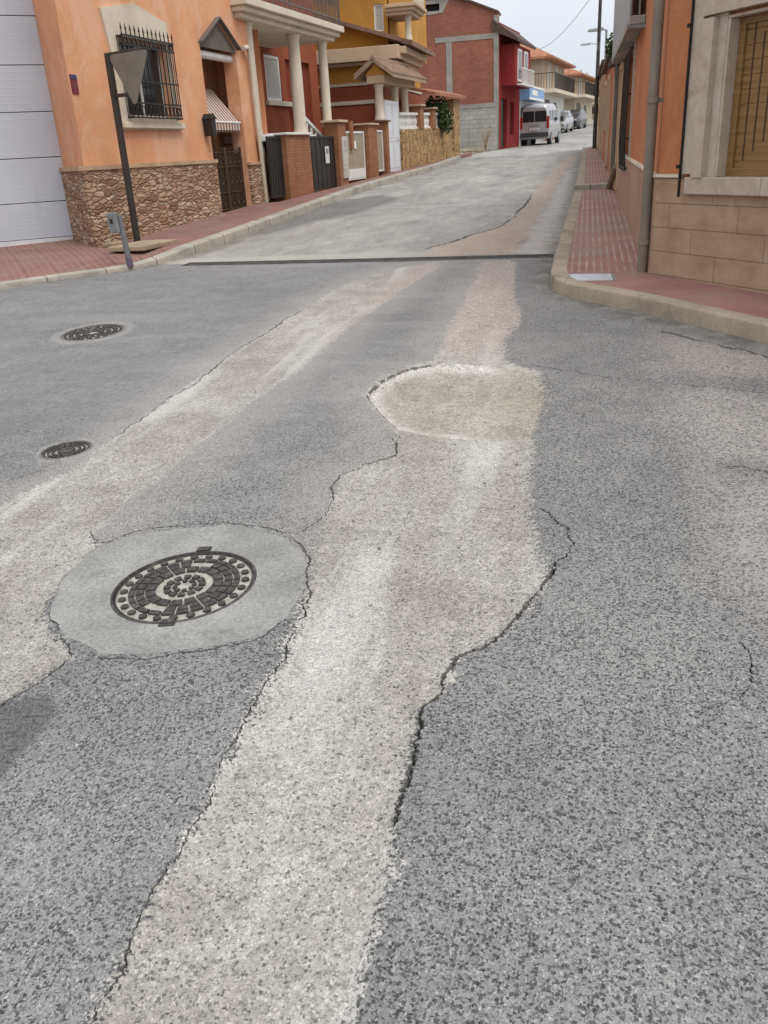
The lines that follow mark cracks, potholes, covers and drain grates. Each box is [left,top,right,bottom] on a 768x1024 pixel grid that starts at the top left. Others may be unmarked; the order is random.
manhole cover [110,546,257,627]
manhole cover [39,440,93,460]
crack [423,194,532,250]
crack [660,331,768,358]
crack [0,438,398,1024]
crack [391,506,575,829]
crack [738,641,755,701]
crack [108,311,299,442]
manhole cover [60,323,126,342]
